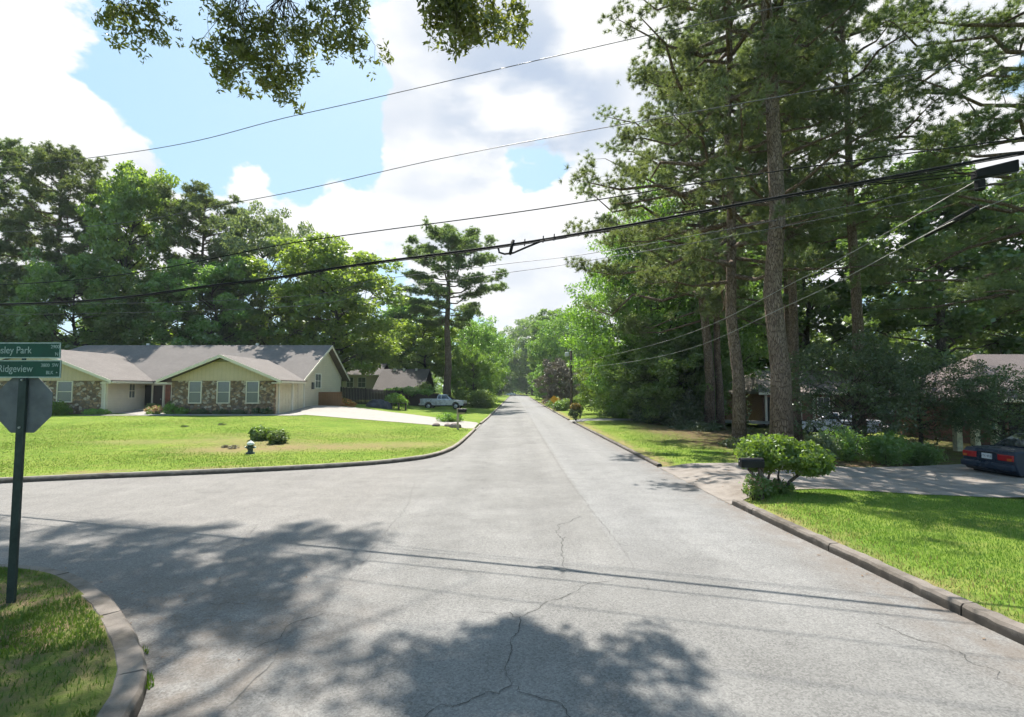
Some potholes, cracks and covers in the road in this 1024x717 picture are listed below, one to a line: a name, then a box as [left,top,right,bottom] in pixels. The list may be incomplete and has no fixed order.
crack [425,516,625,717]
